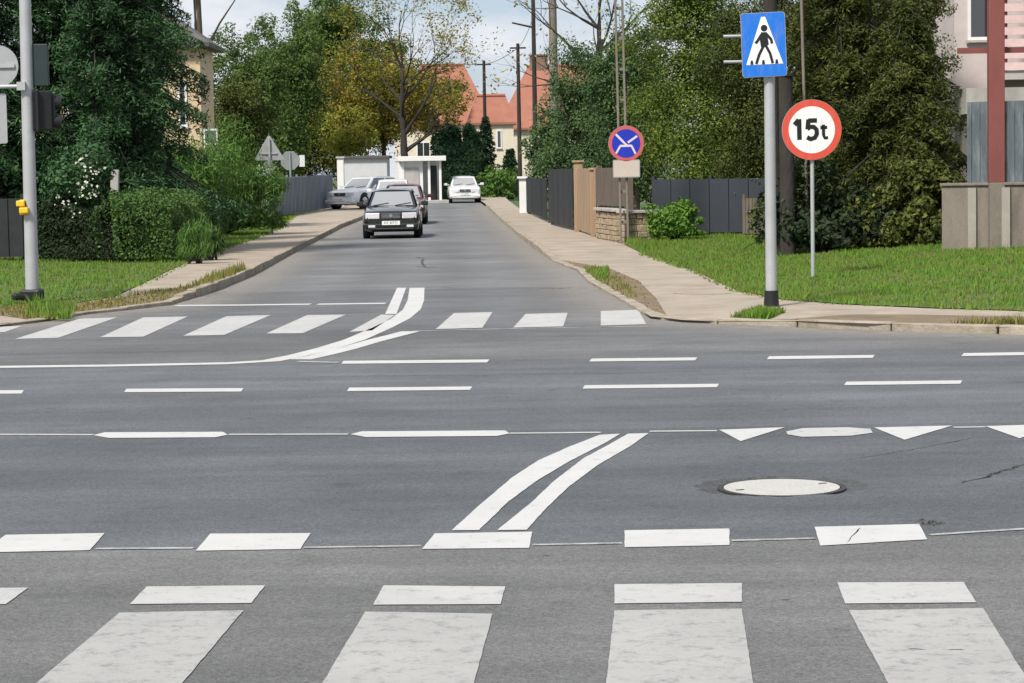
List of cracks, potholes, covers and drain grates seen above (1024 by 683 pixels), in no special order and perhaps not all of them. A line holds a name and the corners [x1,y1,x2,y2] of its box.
crack [962,464,1024,483]
manhole cover [693,476,870,497]
pothole [917,518,945,526]
